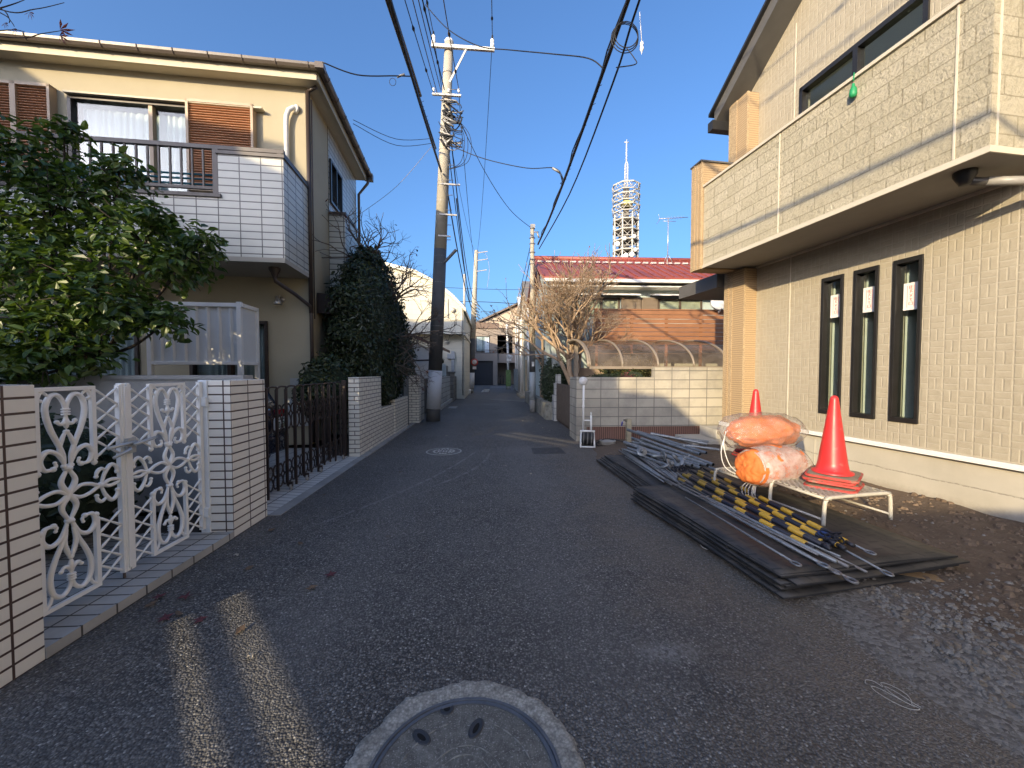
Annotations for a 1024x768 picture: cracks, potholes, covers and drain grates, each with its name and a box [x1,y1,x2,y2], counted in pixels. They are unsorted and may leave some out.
manhole cover [344,680,585,768]
